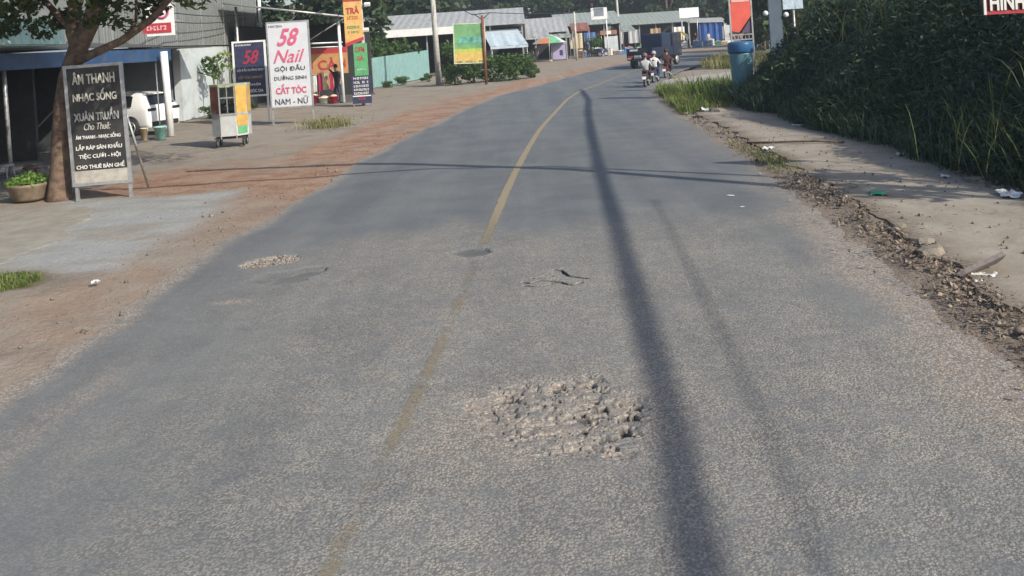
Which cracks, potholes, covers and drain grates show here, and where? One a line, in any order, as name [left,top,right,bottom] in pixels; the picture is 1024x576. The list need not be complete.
pothole [443,246,494,258]
pothole [442,369,662,465]
pothole [235,254,308,270]
crack [518,268,593,288]
